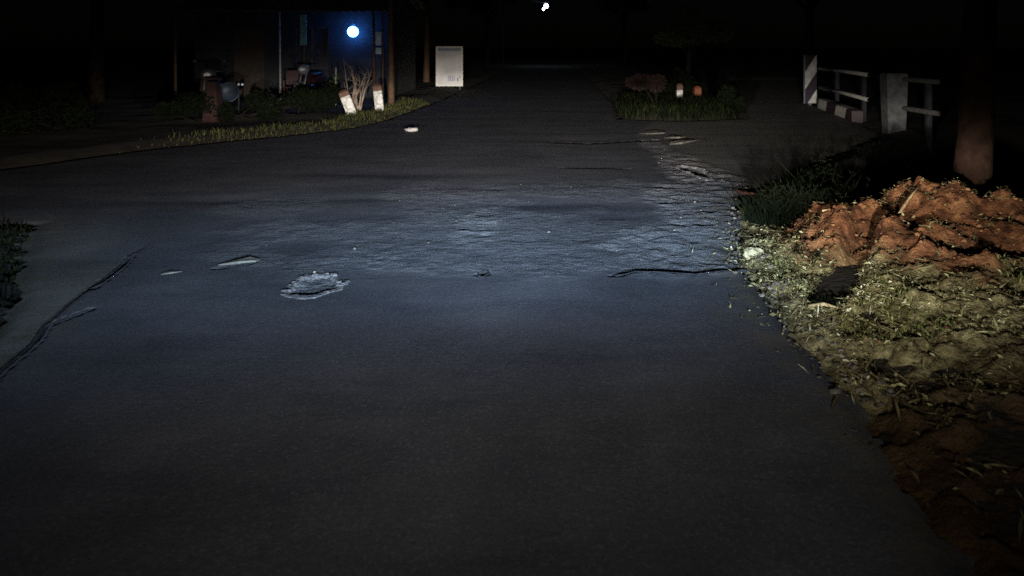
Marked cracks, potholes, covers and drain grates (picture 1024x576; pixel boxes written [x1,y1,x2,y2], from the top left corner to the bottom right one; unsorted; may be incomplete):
crack [86,256,135,291]
crack [0,309,91,378]
pothole [676,164,715,181]
crack [612,269,749,277]
pothole [280,272,350,300]
